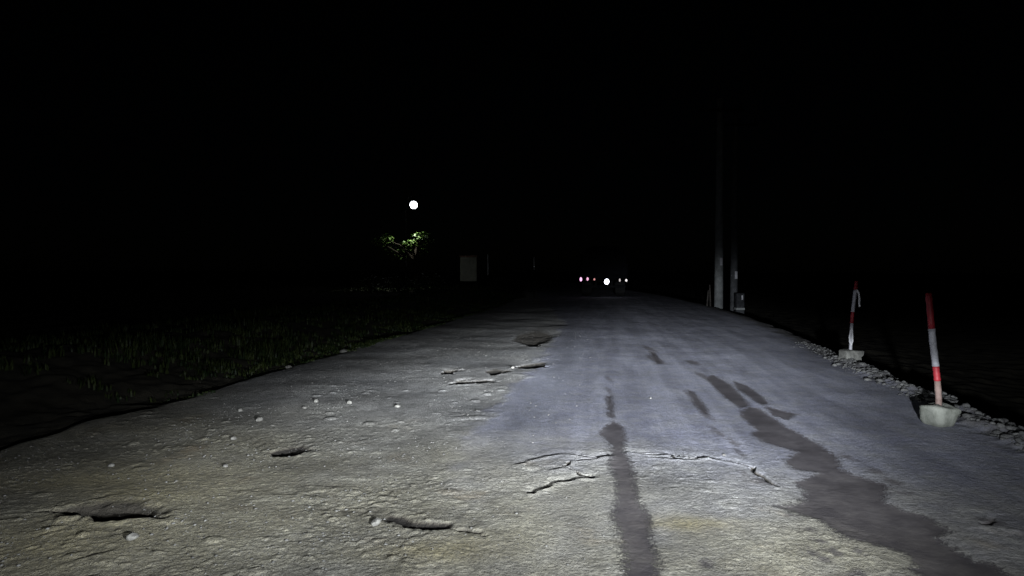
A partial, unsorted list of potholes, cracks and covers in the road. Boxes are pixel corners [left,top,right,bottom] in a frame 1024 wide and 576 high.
pothole [510,322,562,347]
pothole [479,367,517,375]
pothole [265,441,323,457]
pothole [444,377,502,385]
pothole [511,360,558,369]
crack [516,451,782,494]
pothole [29,494,178,522]
